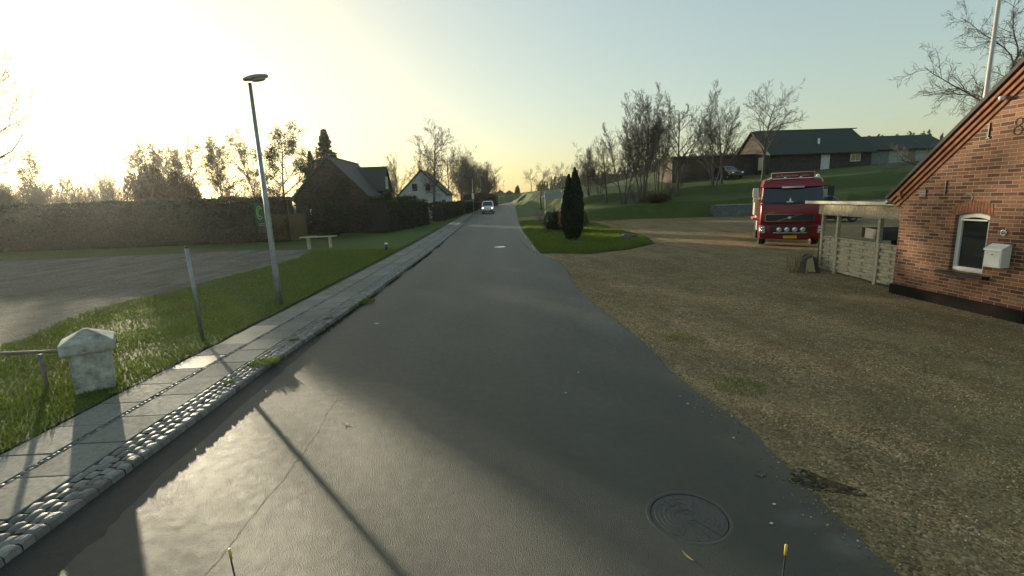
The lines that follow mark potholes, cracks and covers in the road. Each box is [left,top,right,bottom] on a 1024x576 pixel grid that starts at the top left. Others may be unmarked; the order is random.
manhole cover [646,491,735,546]
pothole [787,468,867,497]
